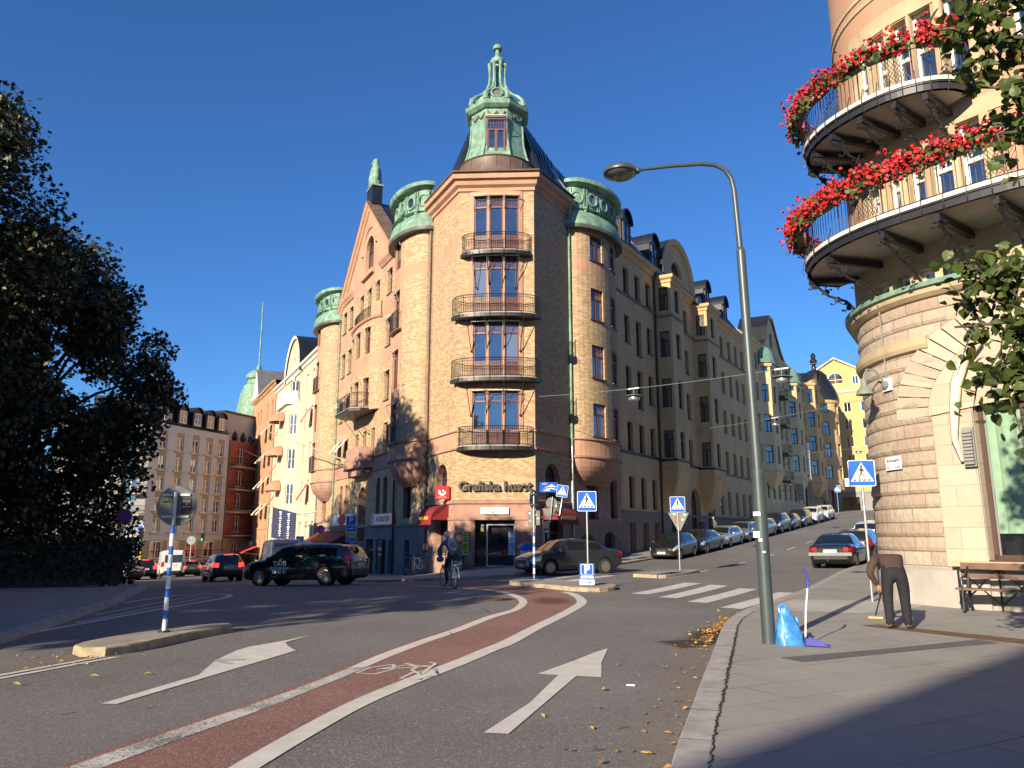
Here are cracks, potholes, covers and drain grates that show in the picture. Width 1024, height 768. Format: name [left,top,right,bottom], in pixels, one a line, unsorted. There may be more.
crack [708,612,752,768]
